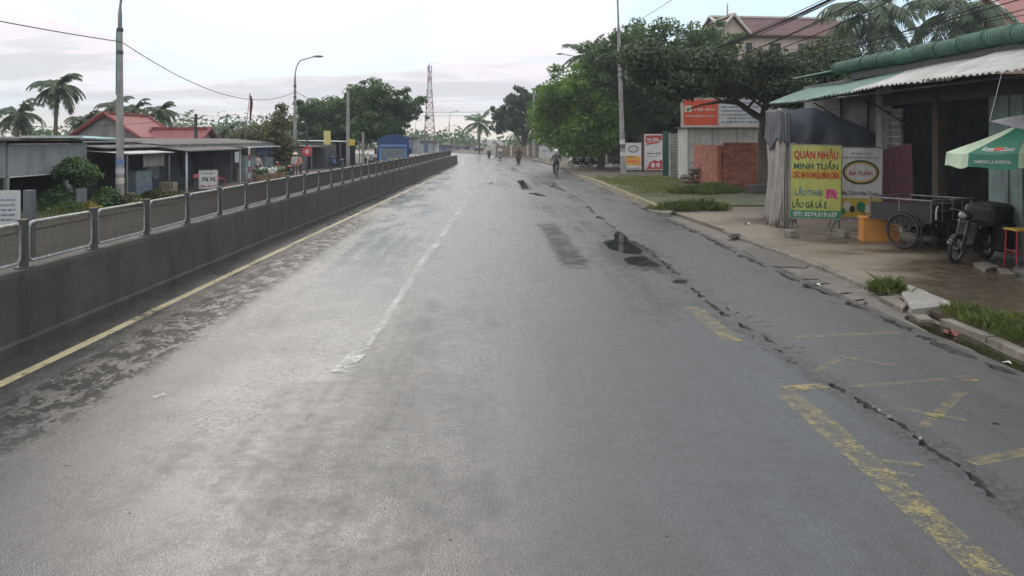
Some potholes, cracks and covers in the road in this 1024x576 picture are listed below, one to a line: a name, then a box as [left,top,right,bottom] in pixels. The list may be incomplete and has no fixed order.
crack [827,382,997,499]
crack [602,188,1020,376]
pothole [624,256,661,267]
pothole [604,232,643,254]
